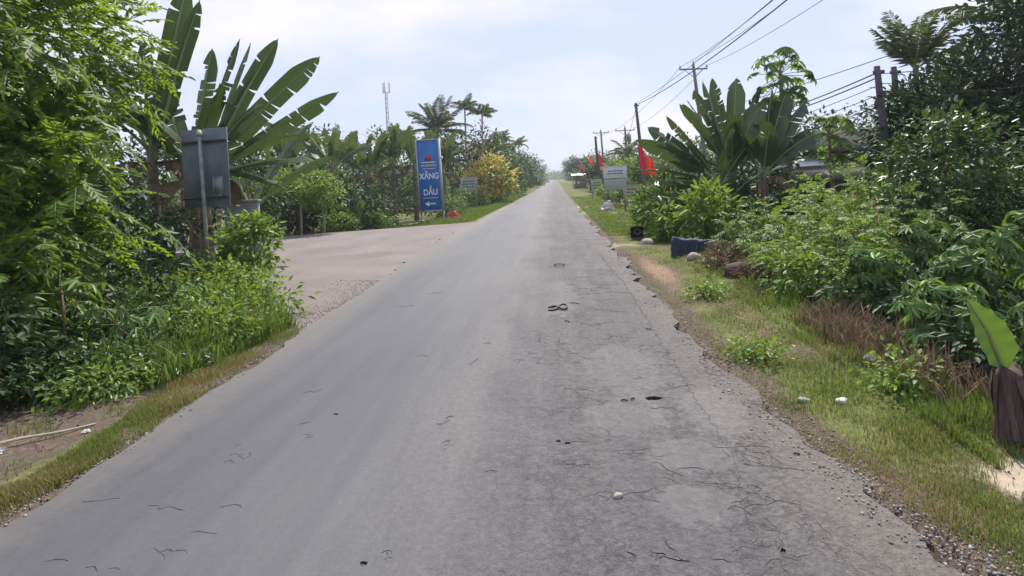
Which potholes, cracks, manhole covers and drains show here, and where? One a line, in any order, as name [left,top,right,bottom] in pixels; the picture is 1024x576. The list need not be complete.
crack [149,505,215,534]
crack [514,239,841,573]
